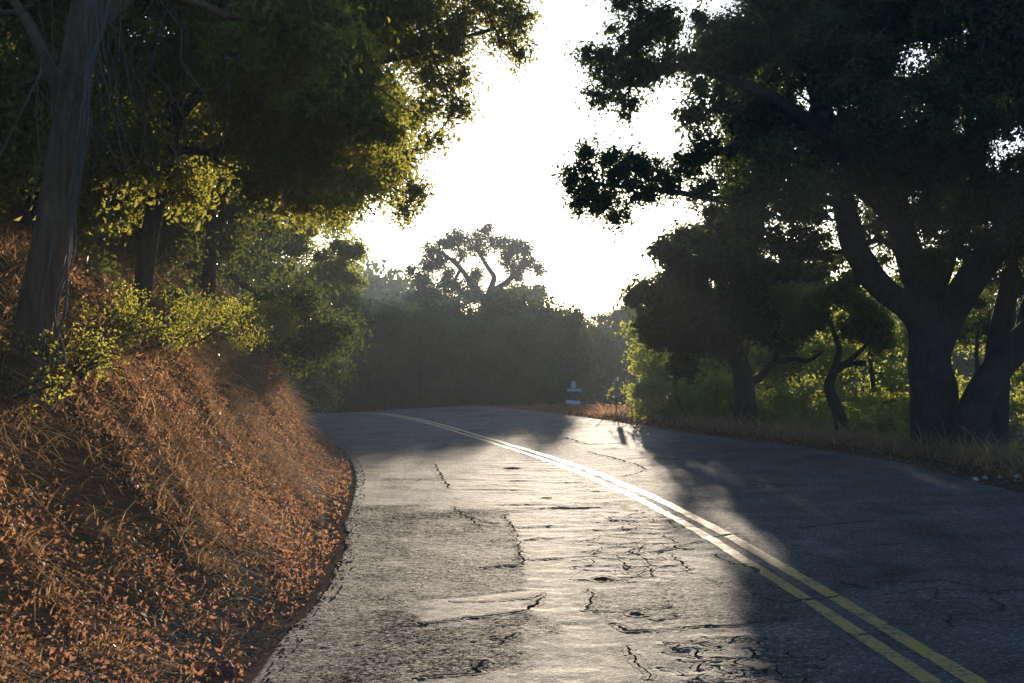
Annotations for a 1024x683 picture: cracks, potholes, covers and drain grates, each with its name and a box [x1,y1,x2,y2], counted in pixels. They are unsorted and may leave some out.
crack [419,593,546,641]
crack [570,510,1022,683]
crack [430,464,453,488]
crack [451,506,530,568]
pothole [586,574,621,583]
